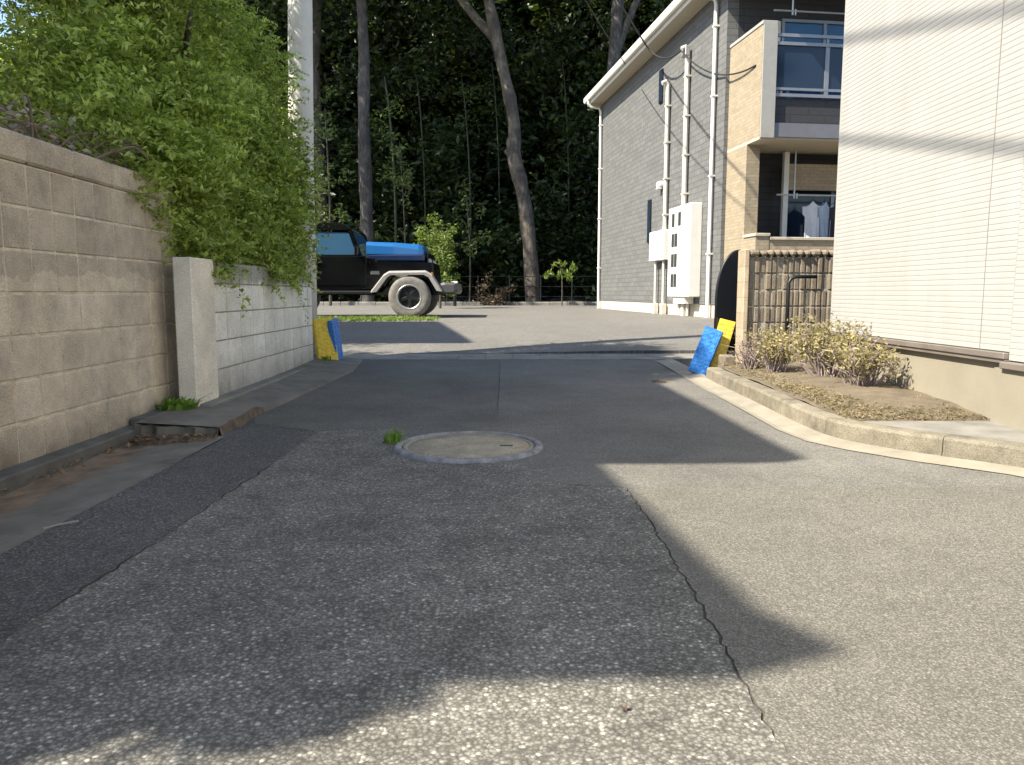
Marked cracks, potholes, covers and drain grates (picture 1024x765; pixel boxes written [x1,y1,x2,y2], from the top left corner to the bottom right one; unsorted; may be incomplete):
manhole cover [394,431,543,464]
crack [559,483,787,751]
